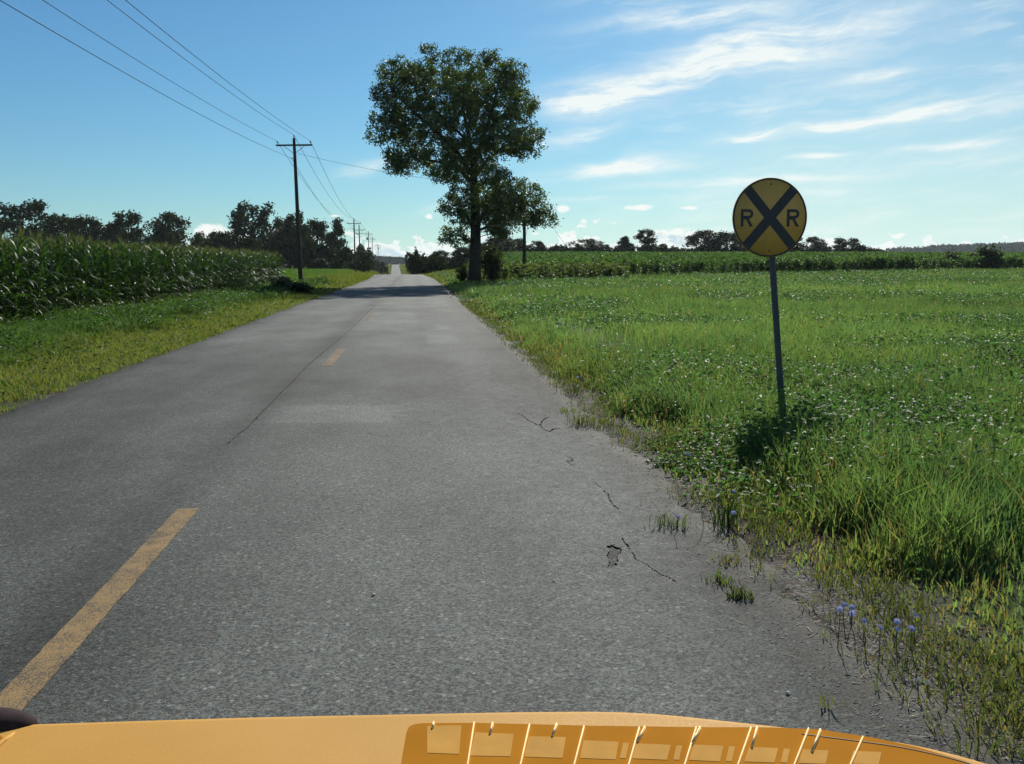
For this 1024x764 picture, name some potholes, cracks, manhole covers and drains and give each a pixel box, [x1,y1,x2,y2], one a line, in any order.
crack [622,538,676,582]
pothole [606,544,622,567]
